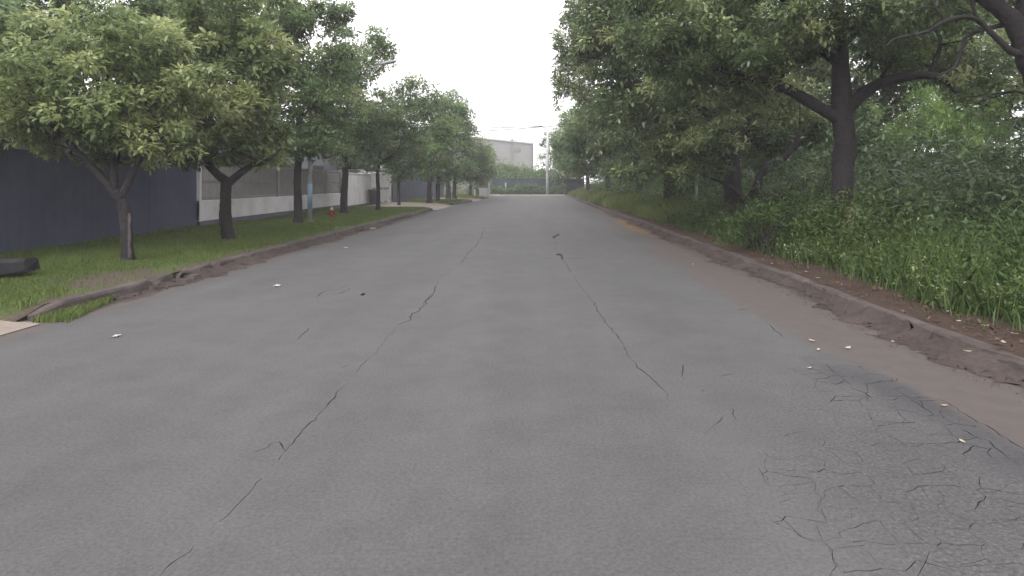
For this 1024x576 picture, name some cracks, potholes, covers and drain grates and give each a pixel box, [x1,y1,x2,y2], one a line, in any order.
crack [789,363,1024,464]
crack [161,232,483,574]
crack [555,241,670,401]
